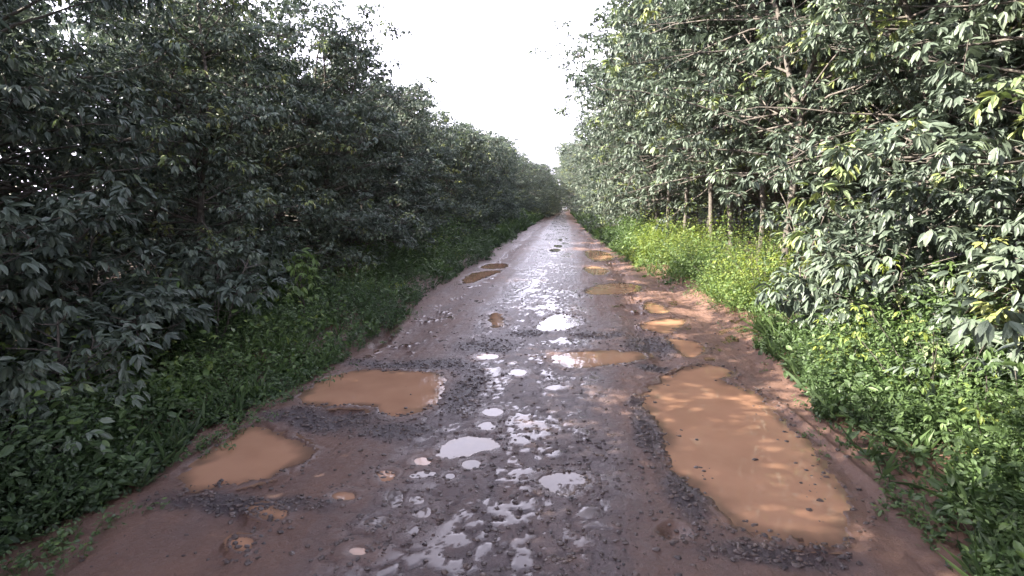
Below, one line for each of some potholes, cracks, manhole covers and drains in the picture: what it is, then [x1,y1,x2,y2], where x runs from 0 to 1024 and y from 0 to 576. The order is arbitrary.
pothole [165,421,322,496]
pothole [662,337,712,359]
pothole [287,367,454,421]
pothole [459,270,505,284]
pothole [635,316,692,334]
pothole [581,265,611,275]
pothole [543,348,655,370]
pothole [633,363,867,557]
pothole [319,485,371,508]
pothole [639,301,673,315]
pothole [484,311,510,329]
